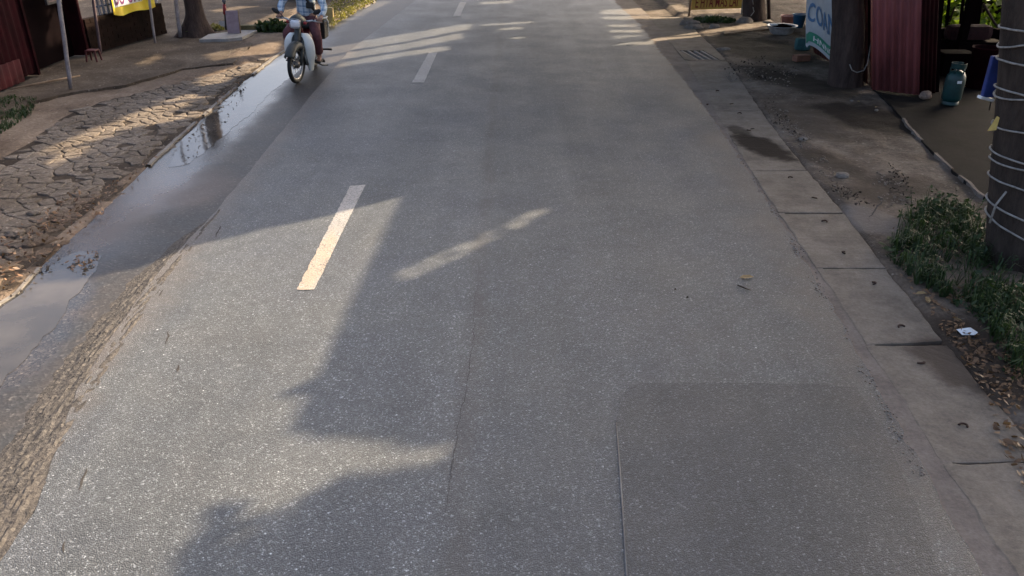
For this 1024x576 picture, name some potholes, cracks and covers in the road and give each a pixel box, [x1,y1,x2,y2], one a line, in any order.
drain grate [674,47,726,61]
